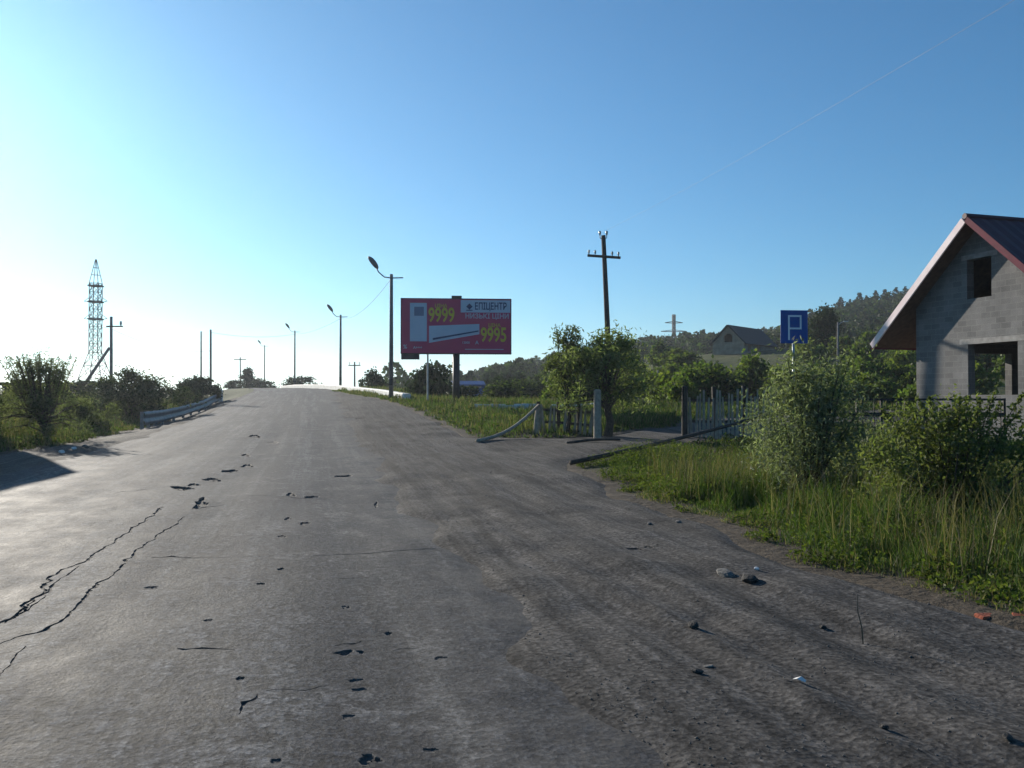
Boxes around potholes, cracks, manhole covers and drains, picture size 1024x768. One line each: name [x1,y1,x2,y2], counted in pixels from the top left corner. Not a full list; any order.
crack [0,505,257,676]
crack [239,686,322,714]
pothole [357,752,384,766]
pothole [192,496,209,510]
